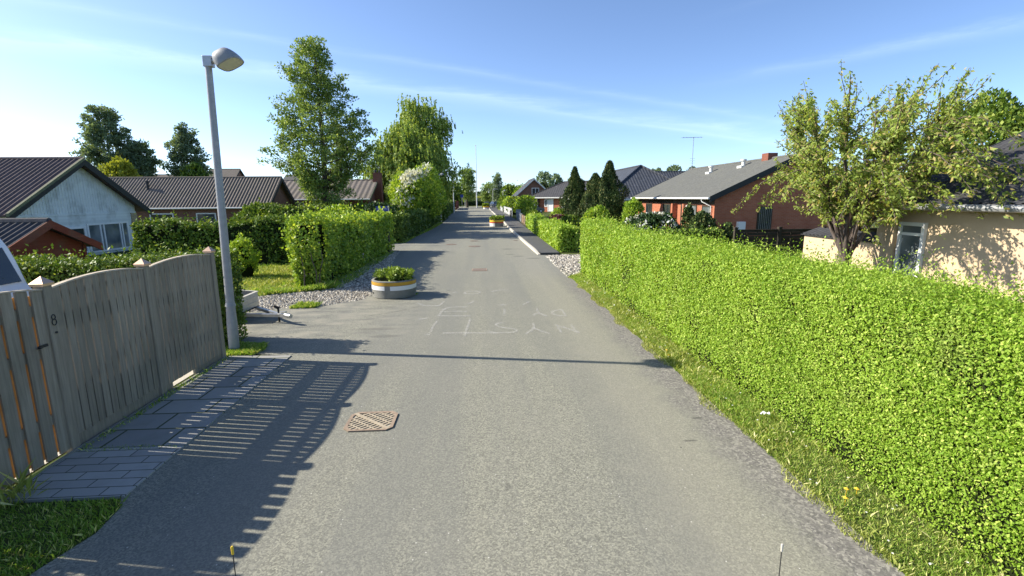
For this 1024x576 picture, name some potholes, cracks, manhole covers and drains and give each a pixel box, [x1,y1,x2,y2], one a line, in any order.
drain grate [343,411,398,432]
